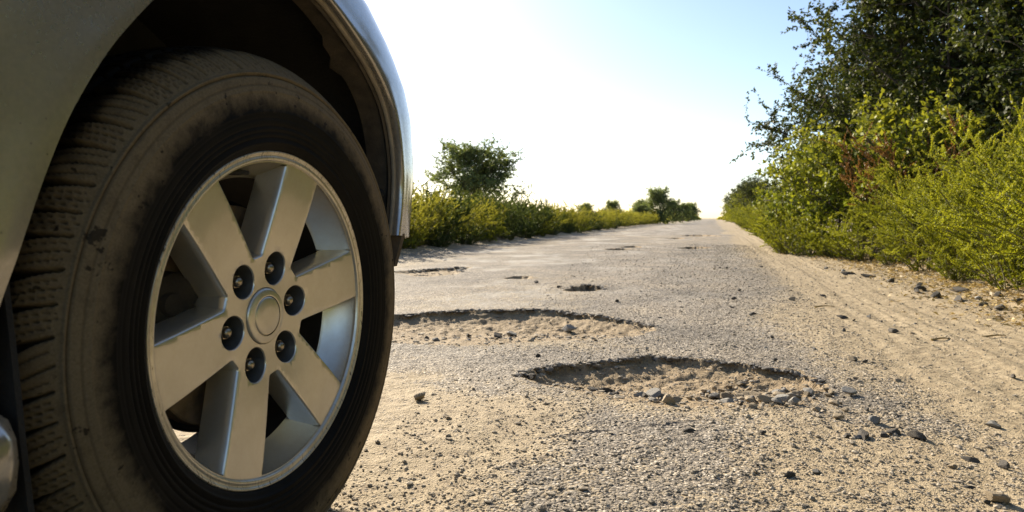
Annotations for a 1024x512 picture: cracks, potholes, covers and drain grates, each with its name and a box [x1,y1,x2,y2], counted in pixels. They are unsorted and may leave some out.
pothole [394,266,472,277]
pothole [561,283,607,292]
pothole [392,308,659,346]
pothole [510,353,831,410]
